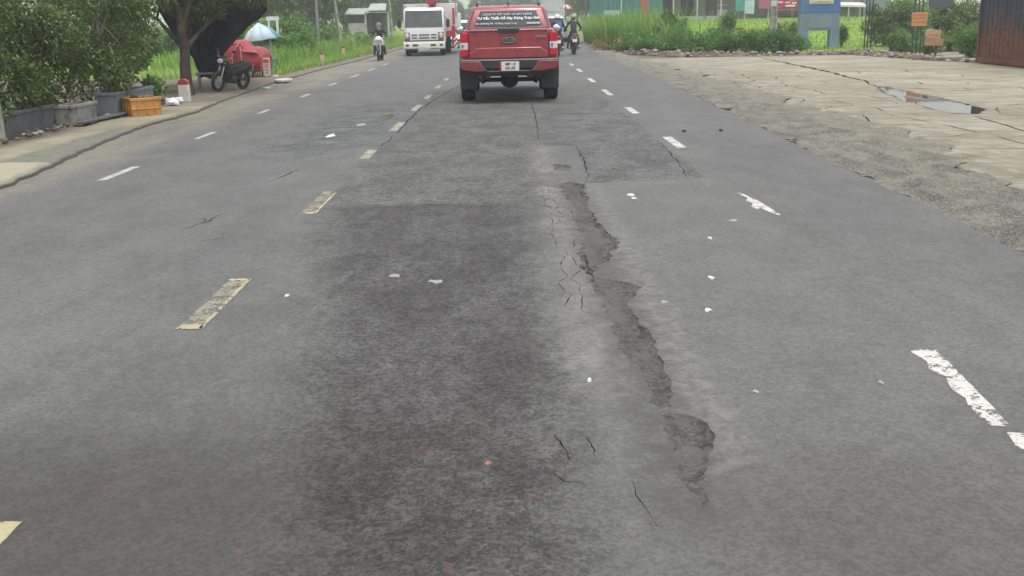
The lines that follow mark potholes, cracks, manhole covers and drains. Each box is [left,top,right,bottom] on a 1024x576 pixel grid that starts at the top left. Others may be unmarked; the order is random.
crack [699,58,1024,149]
crack [541,189,594,314]
crack [554,436,596,484]
pothole [590,275,673,407]
pothole [558,182,621,273]
pothole [660,413,716,510]
